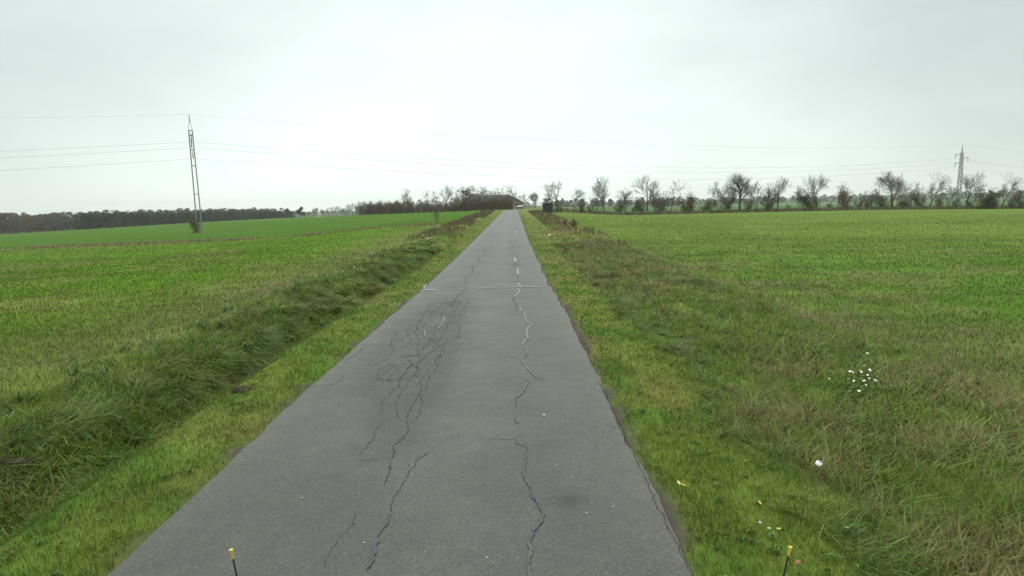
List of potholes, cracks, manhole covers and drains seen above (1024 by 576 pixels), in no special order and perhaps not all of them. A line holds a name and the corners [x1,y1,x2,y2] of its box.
crack [489,231,548,576]
crack [325,259,479,568]
